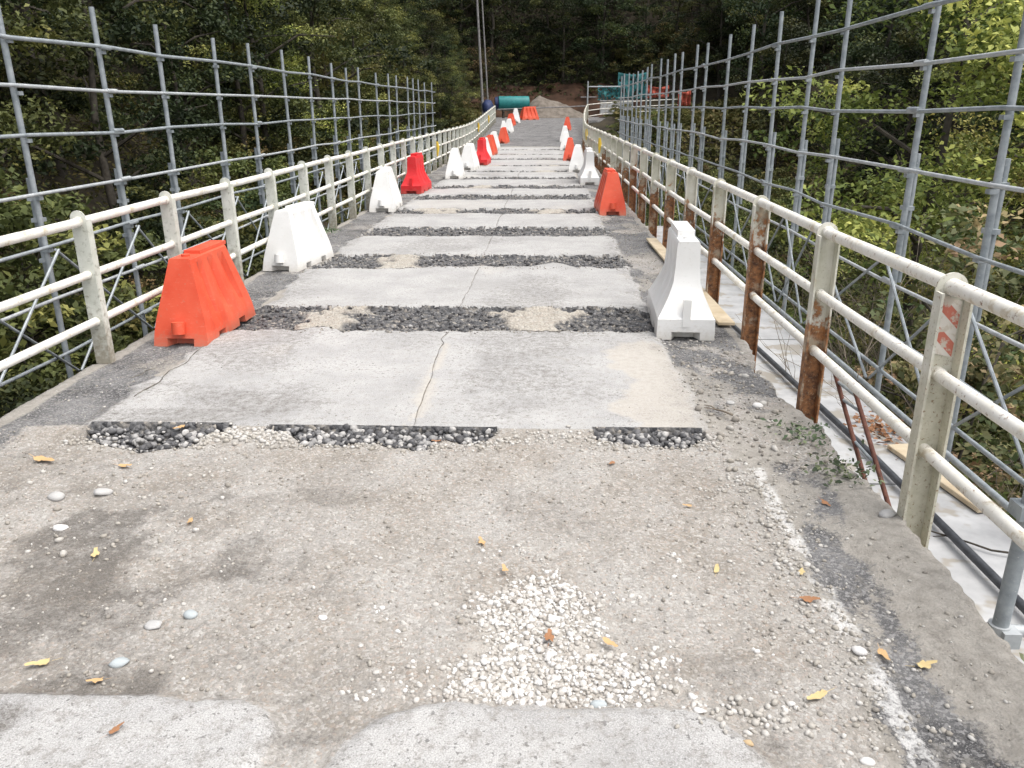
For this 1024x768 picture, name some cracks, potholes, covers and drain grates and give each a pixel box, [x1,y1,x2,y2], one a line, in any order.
crack [130,346,204,397]
crack [415,332,448,423]
